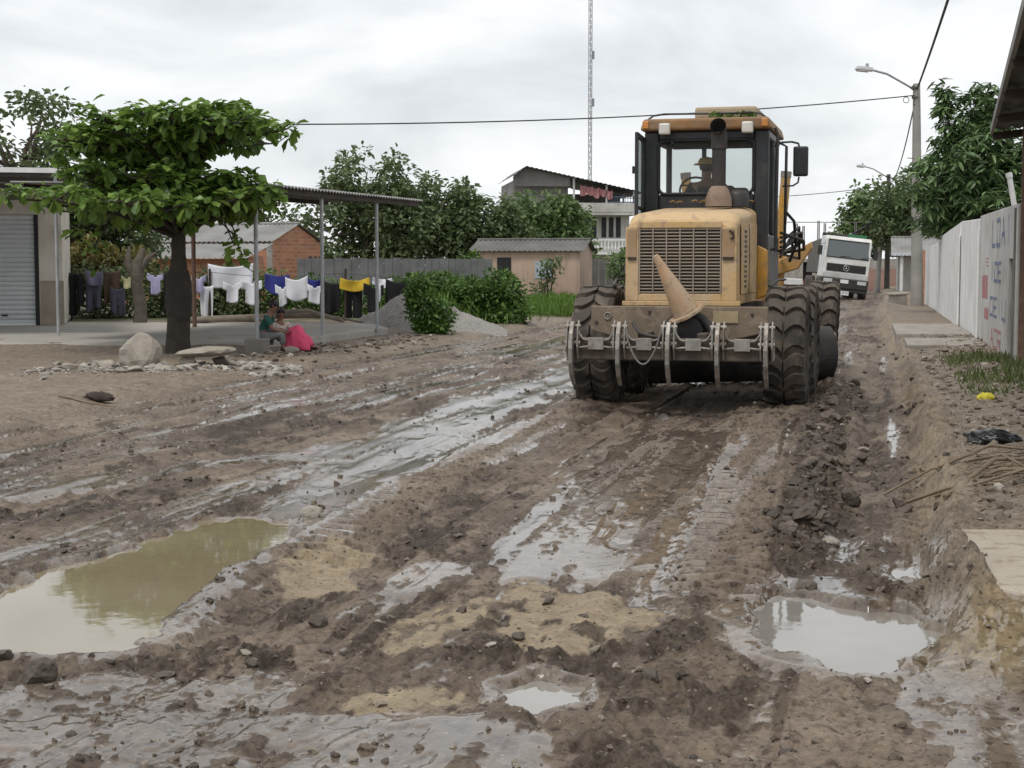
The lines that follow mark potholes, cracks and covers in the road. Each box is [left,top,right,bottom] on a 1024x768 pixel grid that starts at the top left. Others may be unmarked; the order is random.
pothole [0,512,305,655]
pothole [478,663,599,714]
pothole [743,582,959,676]
